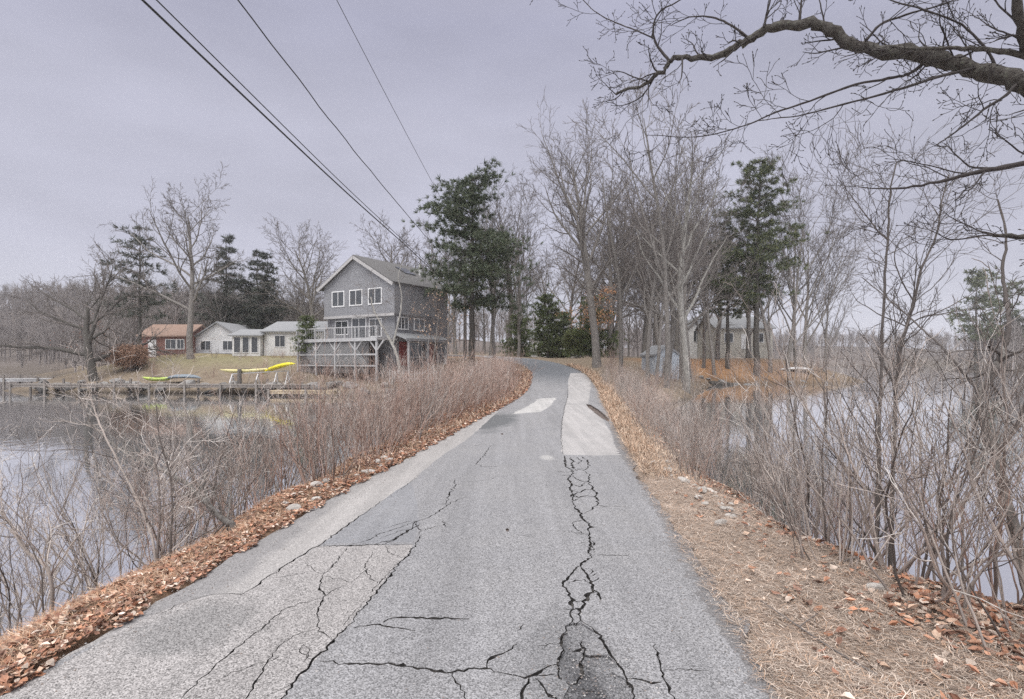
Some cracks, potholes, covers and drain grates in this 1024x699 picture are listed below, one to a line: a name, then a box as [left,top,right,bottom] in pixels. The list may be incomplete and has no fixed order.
crack [162,455,702,699]
